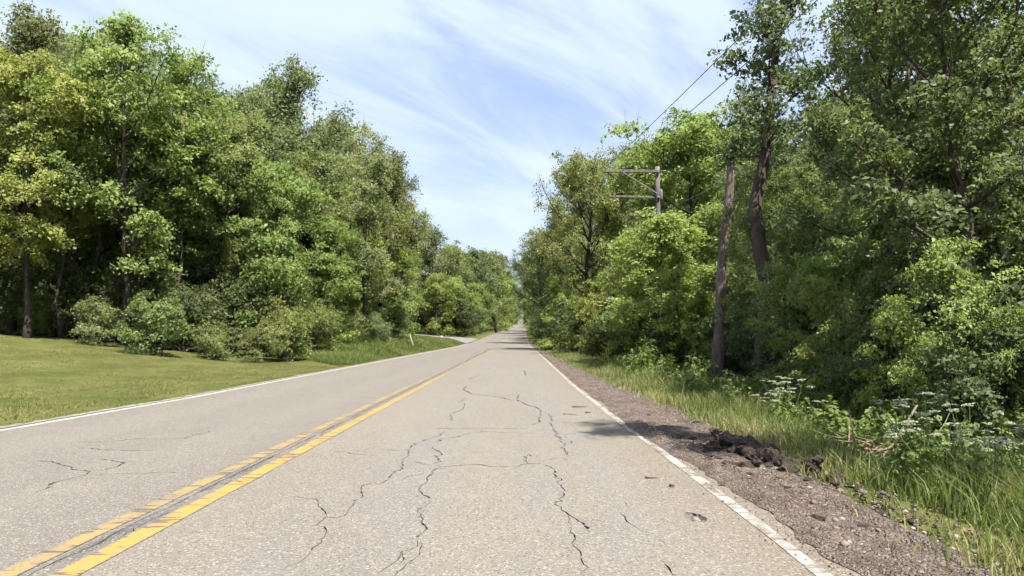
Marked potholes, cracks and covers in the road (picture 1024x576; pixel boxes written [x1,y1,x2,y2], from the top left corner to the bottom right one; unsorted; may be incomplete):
pothole [683,512,708,522]
crack [379,376,590,576]
crack [36,431,210,493]
crack [284,431,444,569]
